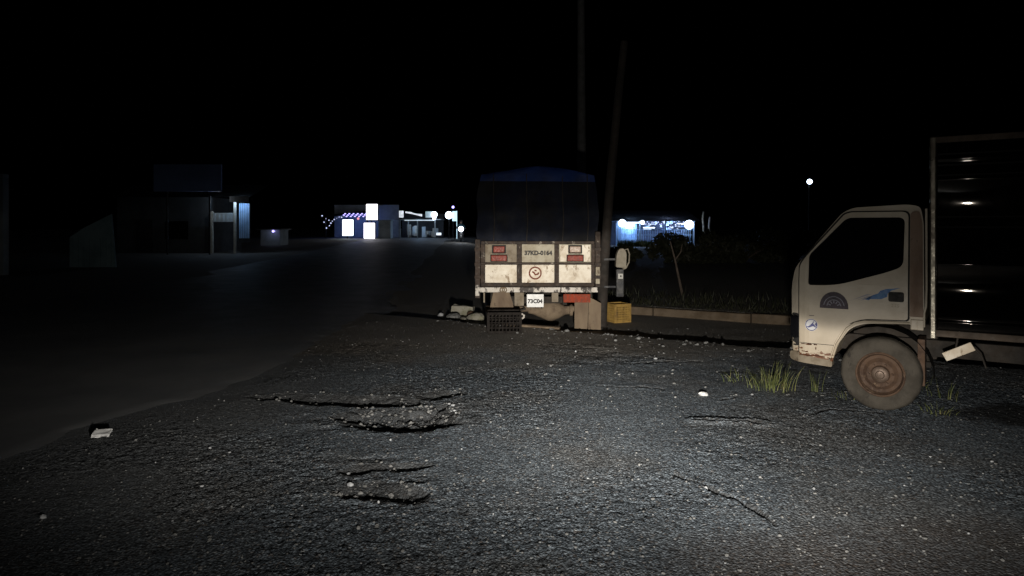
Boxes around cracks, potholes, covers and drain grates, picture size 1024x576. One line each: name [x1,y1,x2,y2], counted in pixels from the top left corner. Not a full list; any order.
pothole [333,480,432,507]
pothole [327,404,463,434]
crack [673,472,779,527]
